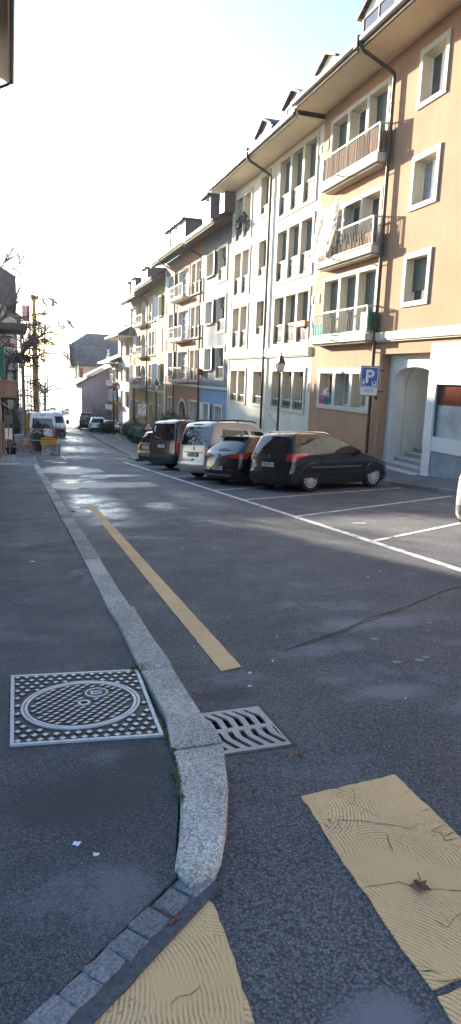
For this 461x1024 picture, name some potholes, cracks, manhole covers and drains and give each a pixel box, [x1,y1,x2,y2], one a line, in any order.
manhole cover [10,669,164,747]
